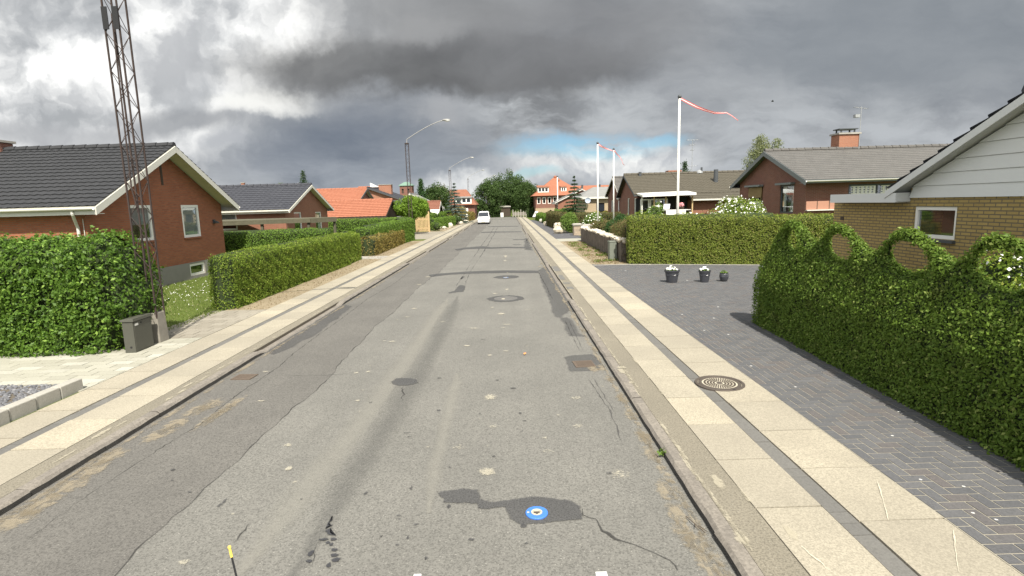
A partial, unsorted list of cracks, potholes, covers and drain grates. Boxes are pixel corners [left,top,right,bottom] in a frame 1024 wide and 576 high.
manhole cover [695,375,745,392]
crack [582,509,678,570]
crack [589,379,621,440]
